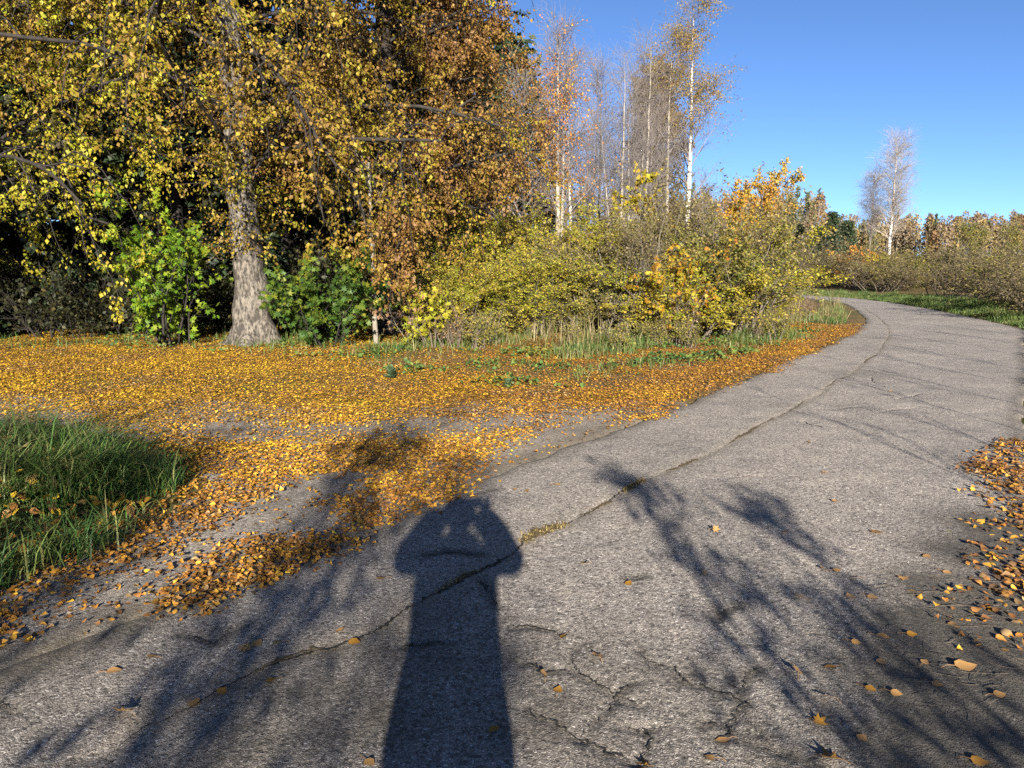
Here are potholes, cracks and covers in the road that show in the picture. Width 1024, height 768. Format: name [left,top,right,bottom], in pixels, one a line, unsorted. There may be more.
crack [58,309,917,766]
